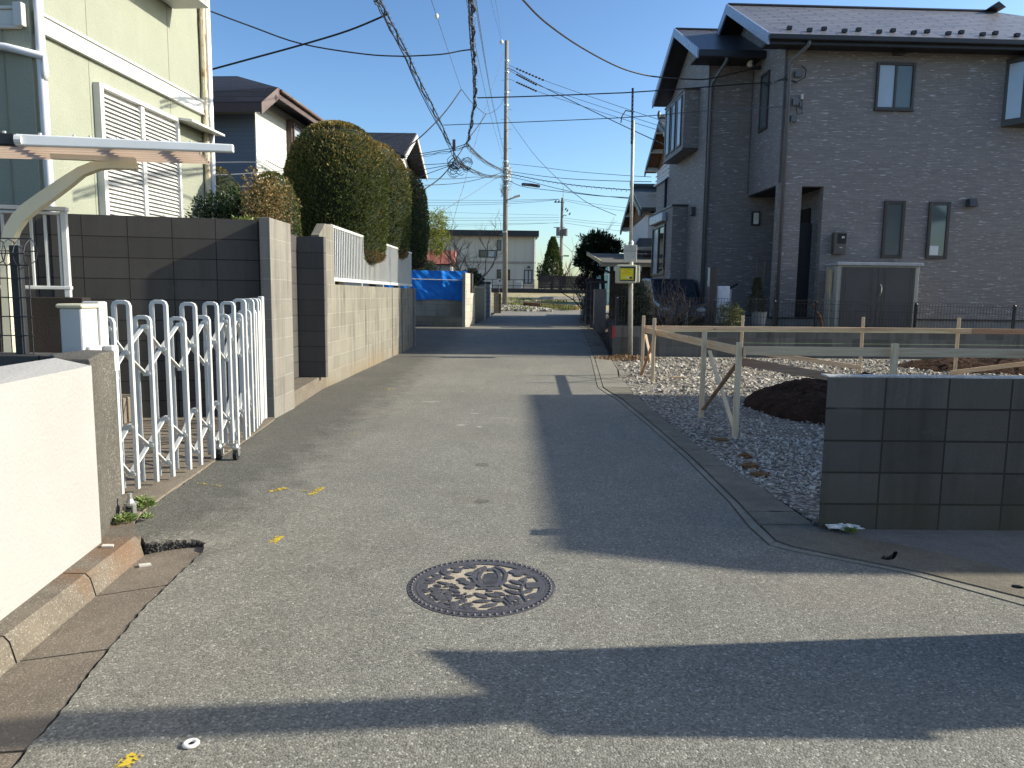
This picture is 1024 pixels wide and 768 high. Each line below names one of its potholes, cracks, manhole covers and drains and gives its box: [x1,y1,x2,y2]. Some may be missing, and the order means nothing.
pothole [142,541,204,554]
manhole cover [406,559,555,618]
